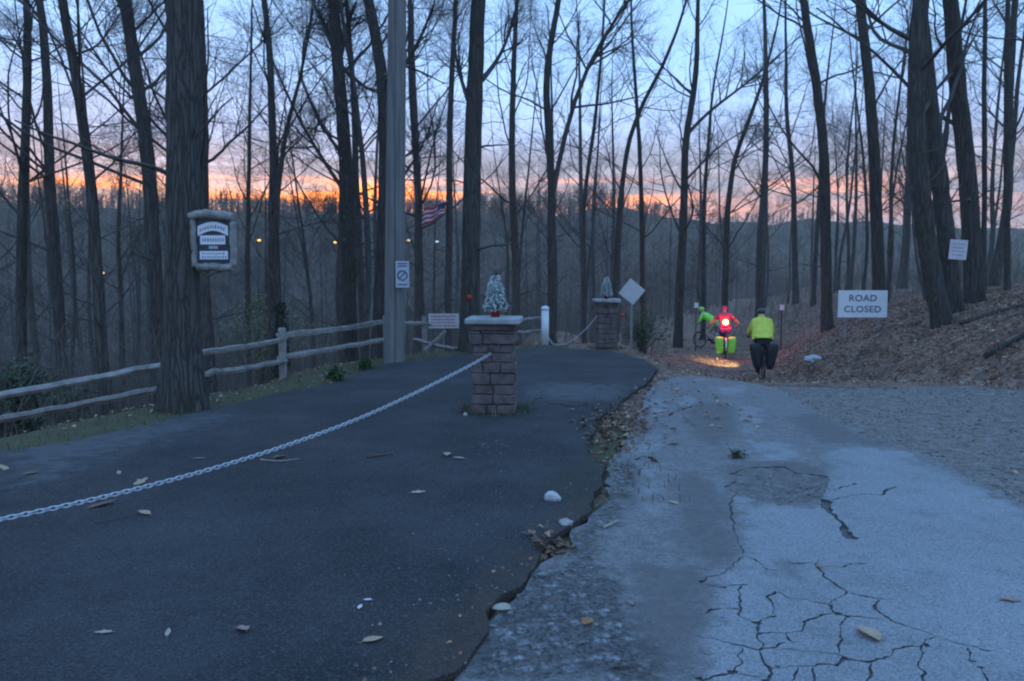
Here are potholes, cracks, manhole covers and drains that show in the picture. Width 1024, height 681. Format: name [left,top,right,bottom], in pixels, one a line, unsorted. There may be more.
crack [694,492,991,681]
crack [818,483,896,539]
